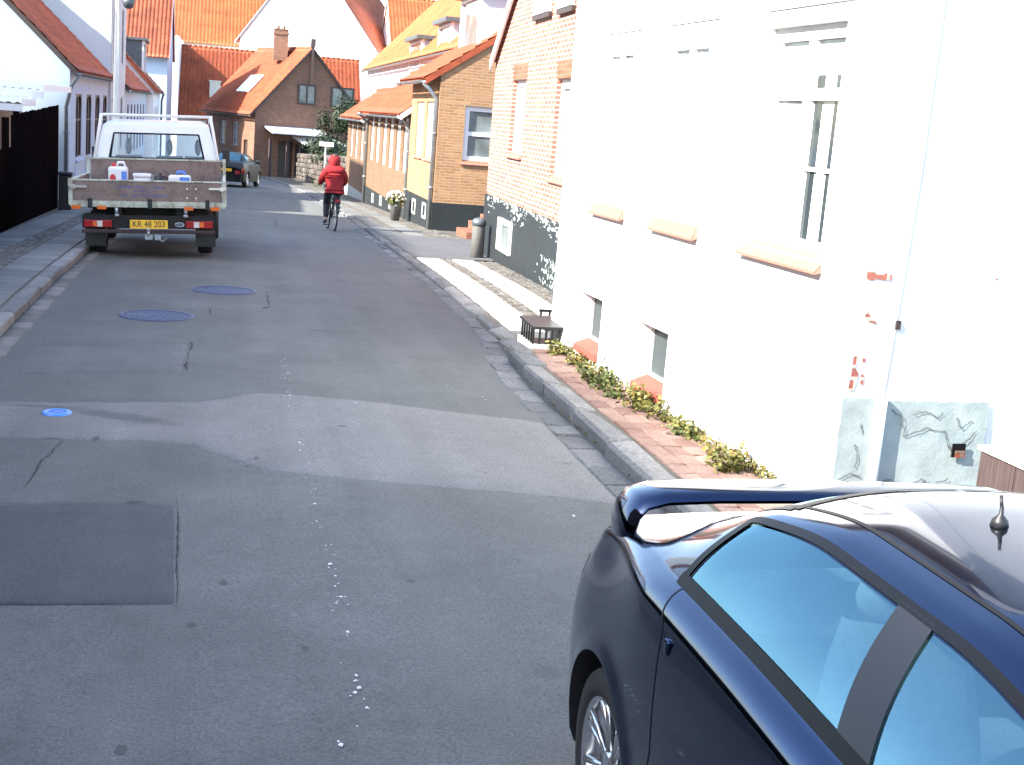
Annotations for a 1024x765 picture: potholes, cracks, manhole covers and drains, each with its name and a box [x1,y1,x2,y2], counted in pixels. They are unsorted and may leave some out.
utility cover [42,408,72,416]
manhole cover [192,285,257,295]
manhole cover [119,309,195,322]
